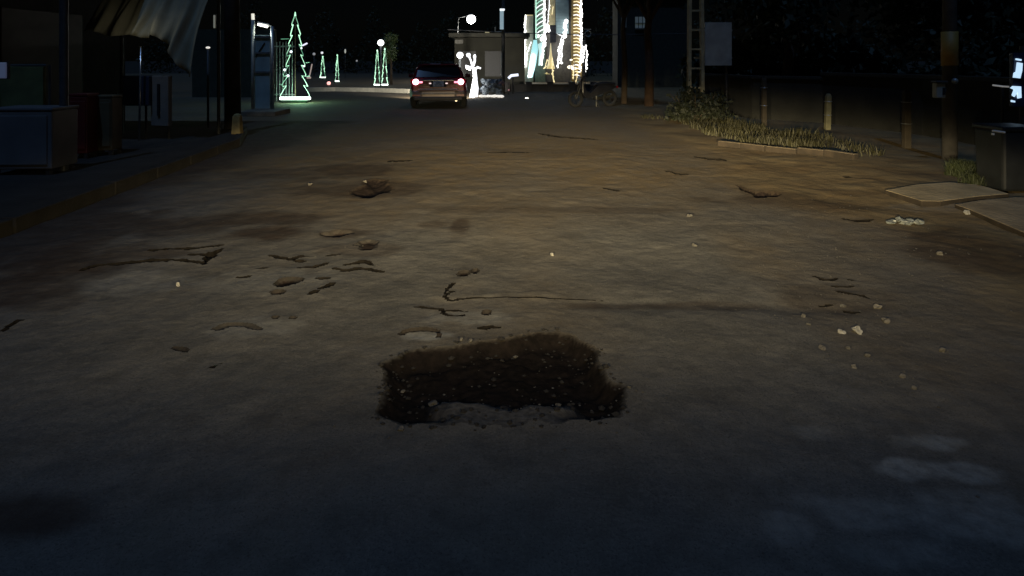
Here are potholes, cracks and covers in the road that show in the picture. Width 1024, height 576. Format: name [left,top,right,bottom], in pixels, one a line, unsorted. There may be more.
crack [812,276,870,314]
crack [414,283,596,330]
pothole [349,179,395,199]
pothole [272,277,306,287]
pothole [397,327,442,338]
crack [488,133,598,153]
crack [78,244,385,295]
pothole [374,331,628,428]
